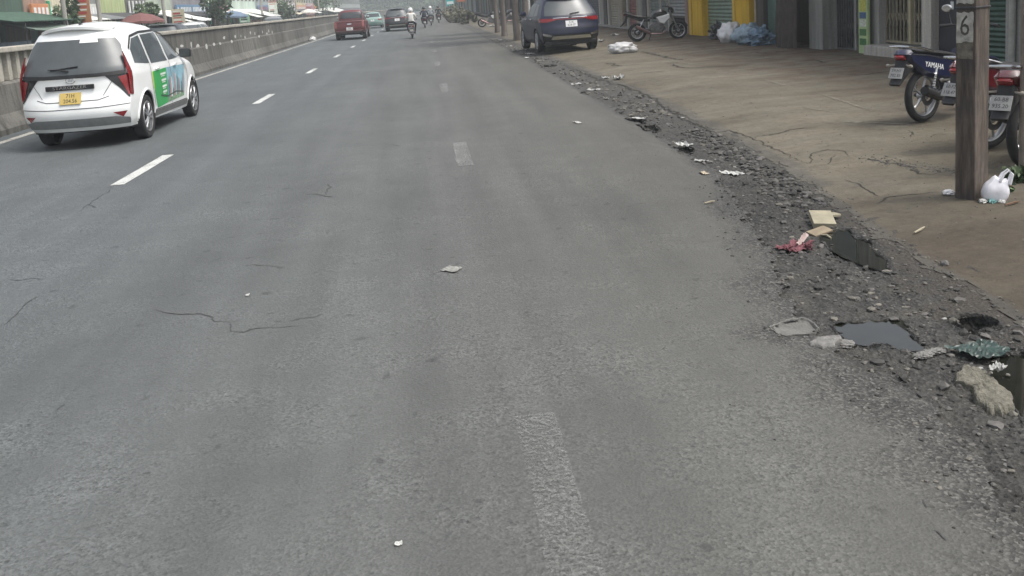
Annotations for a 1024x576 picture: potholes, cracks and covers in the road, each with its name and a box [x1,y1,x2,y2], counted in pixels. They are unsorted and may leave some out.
pothole [820,228,891,276]
pothole [955,313,1000,334]
pothole [829,318,924,353]
crack [158,310,319,332]
crack [866,158,946,174]
crack [847,180,929,204]
pothole [990,348,1024,428]
